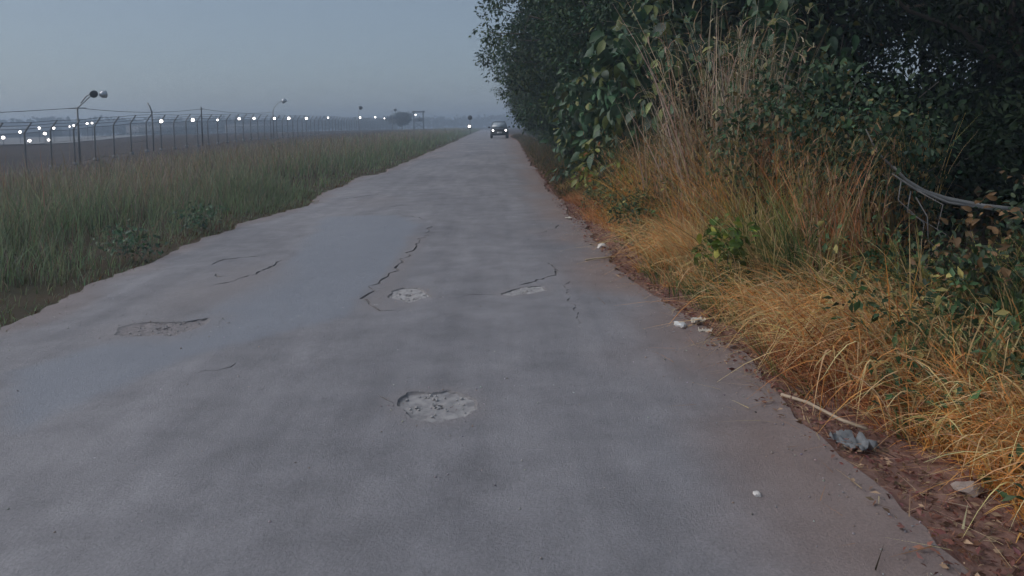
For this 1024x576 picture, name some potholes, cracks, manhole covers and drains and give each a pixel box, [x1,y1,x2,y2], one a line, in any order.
pothole [397,390,478,423]
pothole [114,317,211,337]
crack [521,263,581,328]
pothole [501,286,547,296]
crack [347,195,431,311]
crack [210,255,279,286]
pothole [388,288,431,303]
